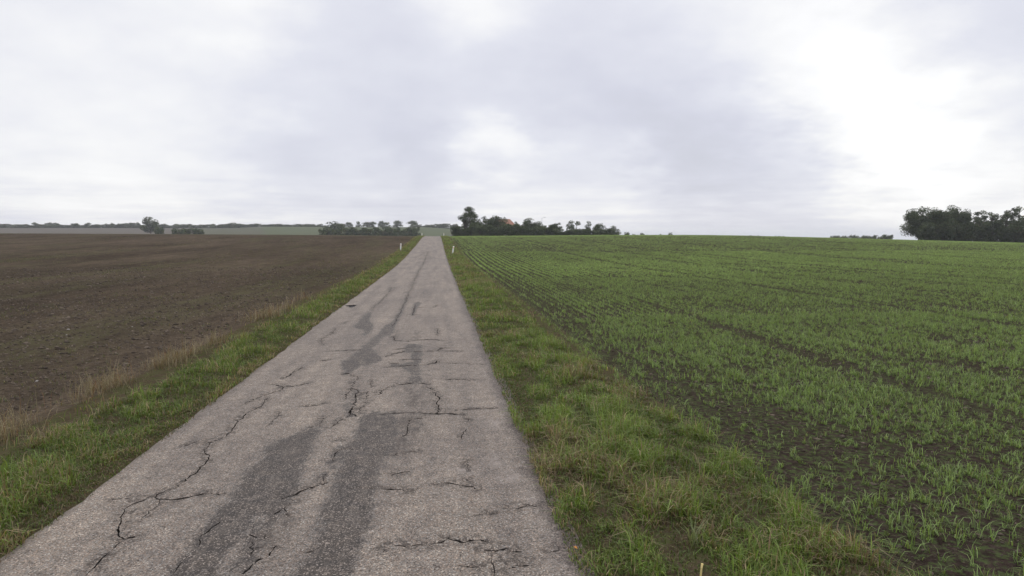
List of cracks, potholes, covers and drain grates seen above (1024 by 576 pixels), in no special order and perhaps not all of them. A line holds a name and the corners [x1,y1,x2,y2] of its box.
crack [87,368,307,575]
crack [273,439,348,515]
crack [303,330,495,455]
crack [386,538,529,575]
